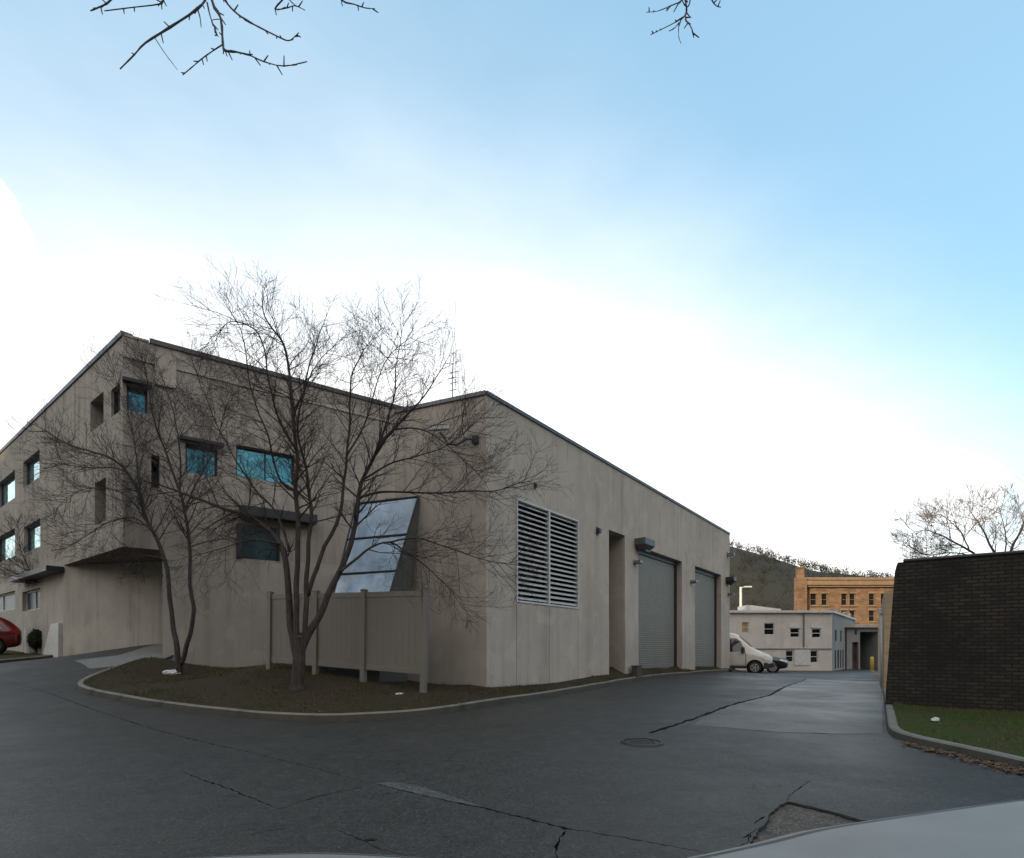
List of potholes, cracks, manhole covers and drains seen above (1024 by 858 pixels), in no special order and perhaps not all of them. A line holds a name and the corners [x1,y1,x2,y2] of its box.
manhole cover [621,738,664,747]
crack [184,772,361,809]
crack [554,827,566,858]
pothole [750,801,865,844]
